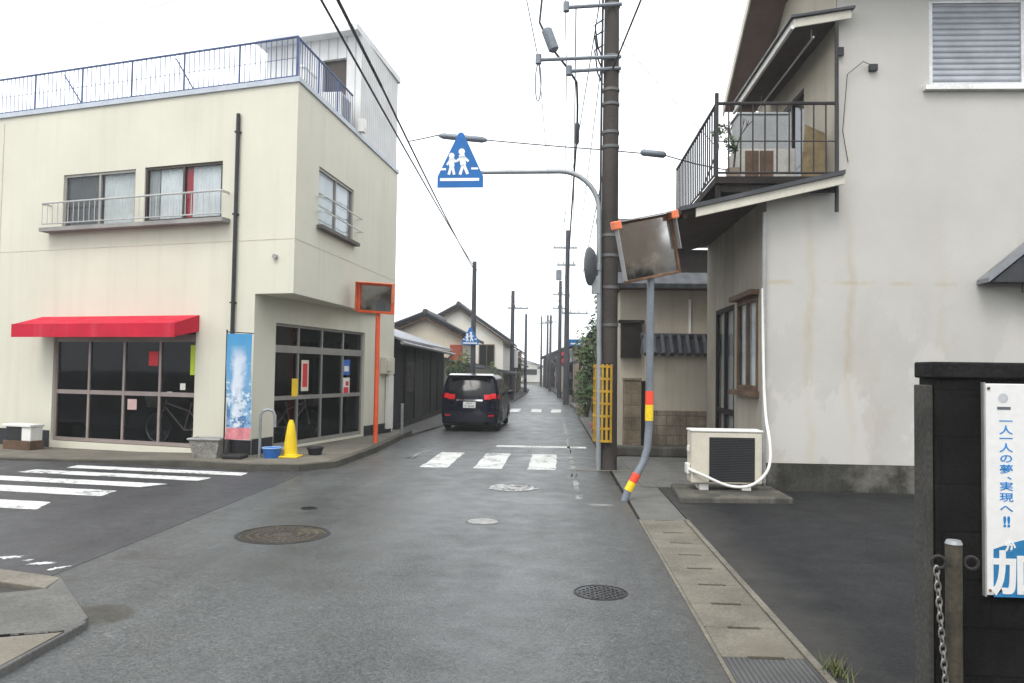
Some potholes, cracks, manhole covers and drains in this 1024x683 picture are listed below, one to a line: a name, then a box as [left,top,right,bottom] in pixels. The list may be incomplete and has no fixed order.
manhole cover [234,525,330,544]
manhole cover [487,484,539,492]
manhole cover [573,585,628,600]
